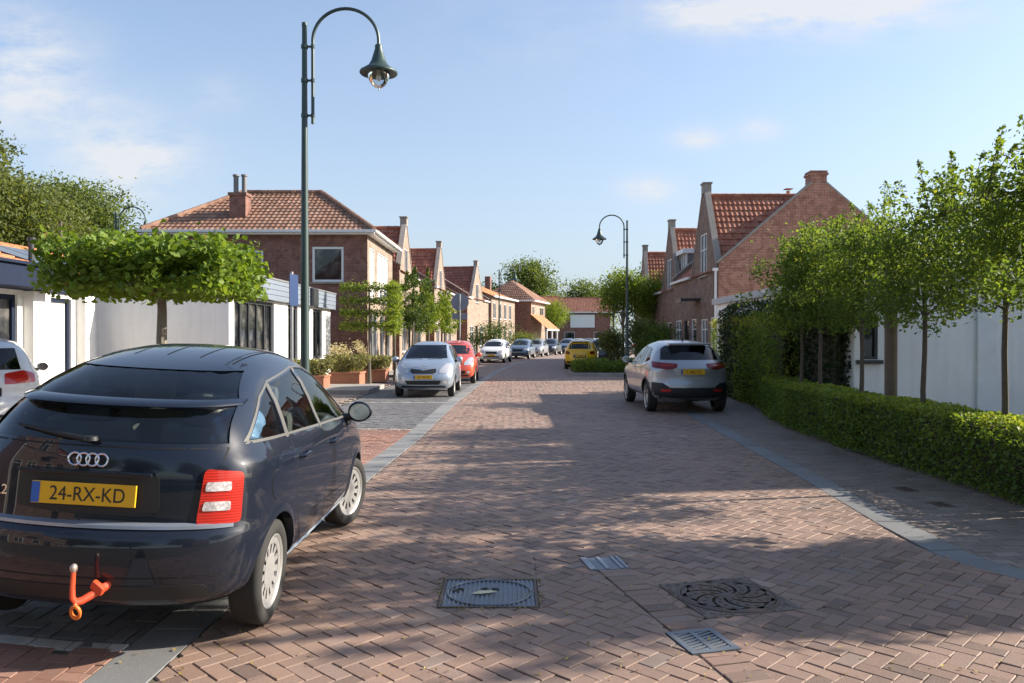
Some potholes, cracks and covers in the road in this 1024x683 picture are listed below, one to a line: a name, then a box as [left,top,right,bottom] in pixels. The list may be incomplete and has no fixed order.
drain grate [666,628,741,656]
manhole cover [659,577,804,619]
manhole cover [437,579,539,609]
